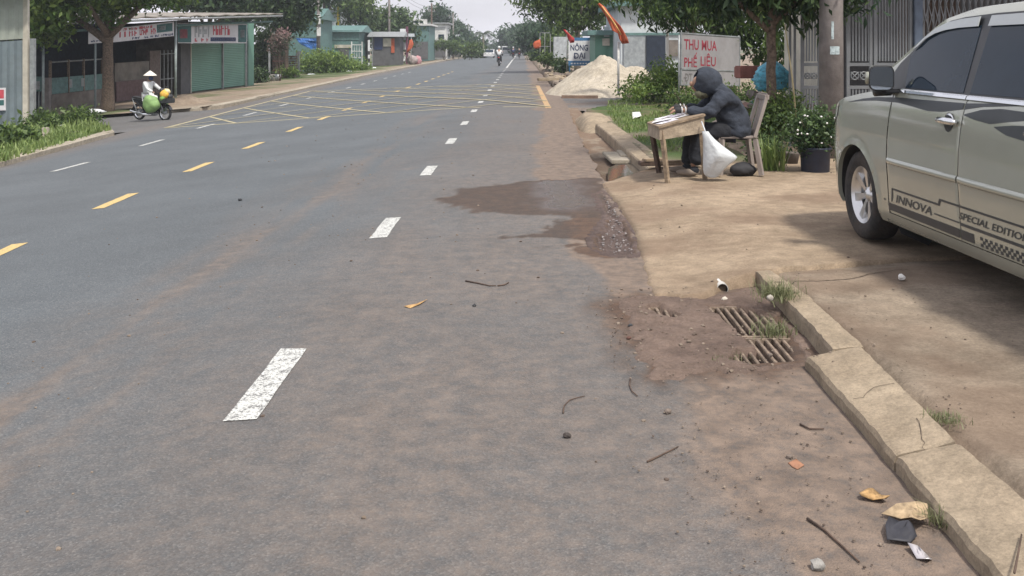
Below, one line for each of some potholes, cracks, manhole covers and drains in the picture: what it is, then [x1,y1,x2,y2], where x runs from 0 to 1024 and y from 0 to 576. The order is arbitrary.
drain grate [648,306,788,338]
pothole [585,190,642,258]
drain grate [734,338,794,364]
